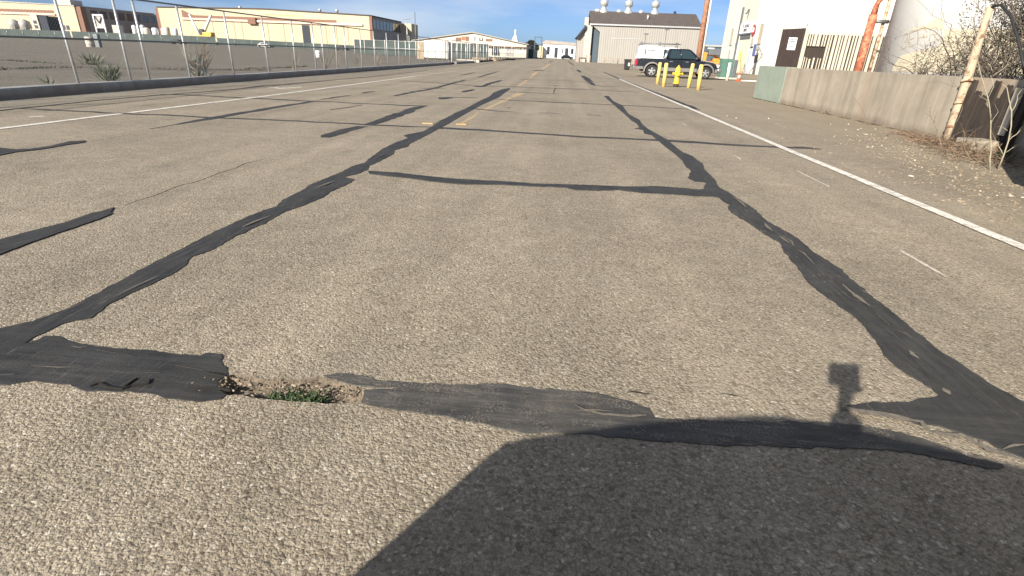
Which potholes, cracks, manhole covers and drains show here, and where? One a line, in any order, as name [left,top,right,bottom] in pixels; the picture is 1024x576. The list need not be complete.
crack [127,161,254,205]
pothole [220,374,363,404]
